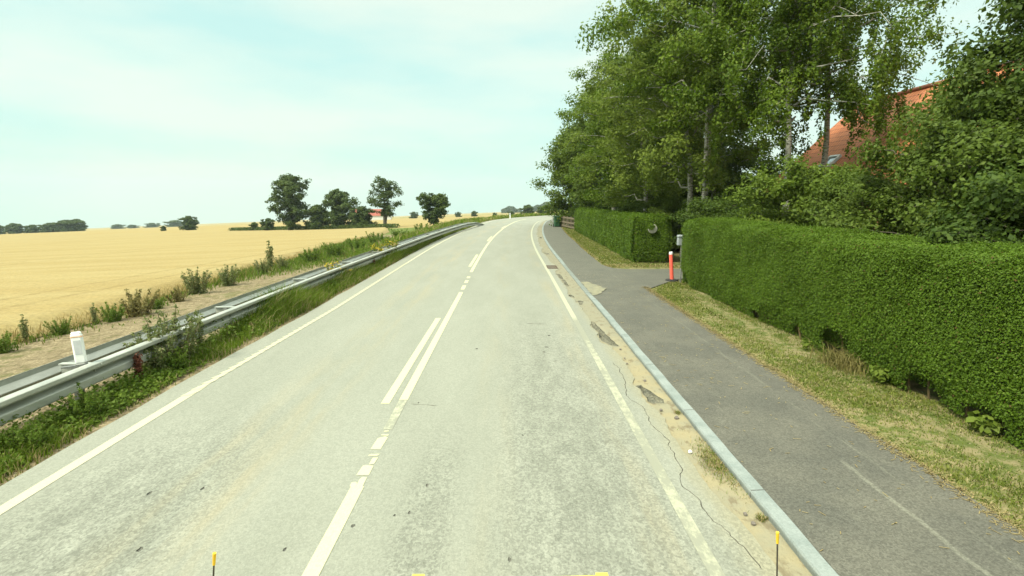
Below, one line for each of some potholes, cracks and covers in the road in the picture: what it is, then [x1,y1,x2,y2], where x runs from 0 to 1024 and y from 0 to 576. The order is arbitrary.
pothole [636,385,664,404]
pothole [591,322,619,346]
crack [613,363,762,569]
